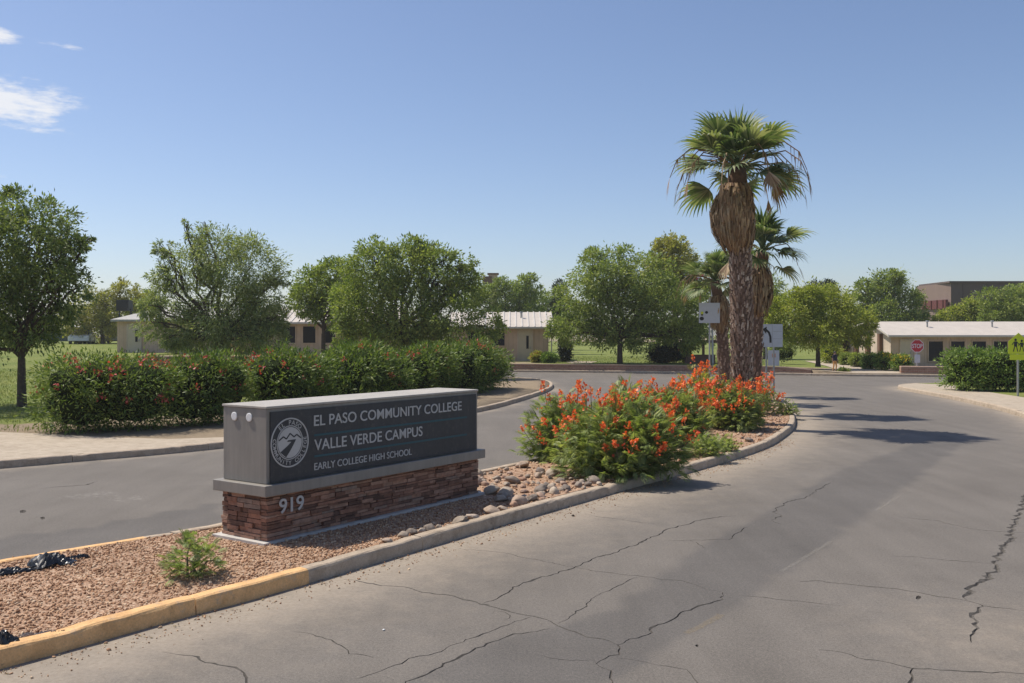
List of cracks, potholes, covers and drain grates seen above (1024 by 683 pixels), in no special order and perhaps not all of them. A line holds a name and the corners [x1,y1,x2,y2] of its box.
crack [819,649,1023,683]
crack [802,495,1024,643]
crack [165,652,248,683]
crack [302,632,371,657]
crack [773,483,829,523]
crack [345,514,744,683]
